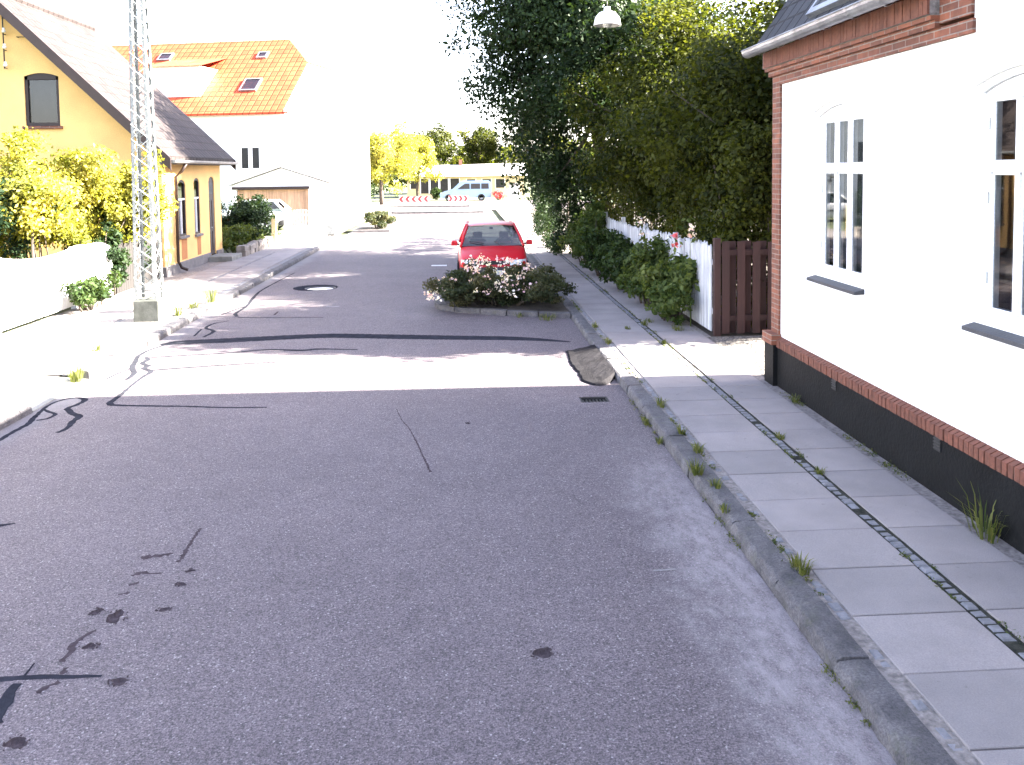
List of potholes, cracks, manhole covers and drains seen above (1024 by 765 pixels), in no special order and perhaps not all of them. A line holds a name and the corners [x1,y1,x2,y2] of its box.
pothole [106,609,128,624]
pothole [530,646,558,659]
crack [396,408,432,472]
pothole [2,734,31,751]
pothole [107,675,132,687]
